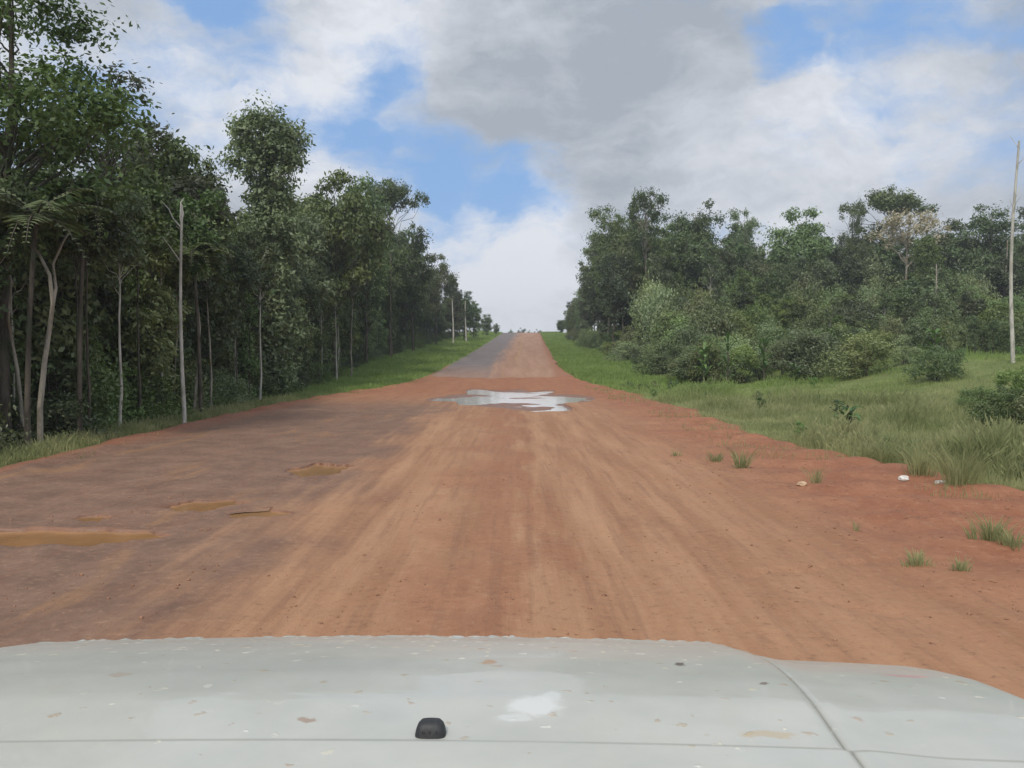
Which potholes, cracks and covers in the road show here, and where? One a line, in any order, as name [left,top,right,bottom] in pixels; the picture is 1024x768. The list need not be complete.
pothole [203,503,315,523]
pothole [268,461,367,480]
pothole [419,389,602,413]
pothole [135,496,274,517]
pothole [0,523,196,554]
